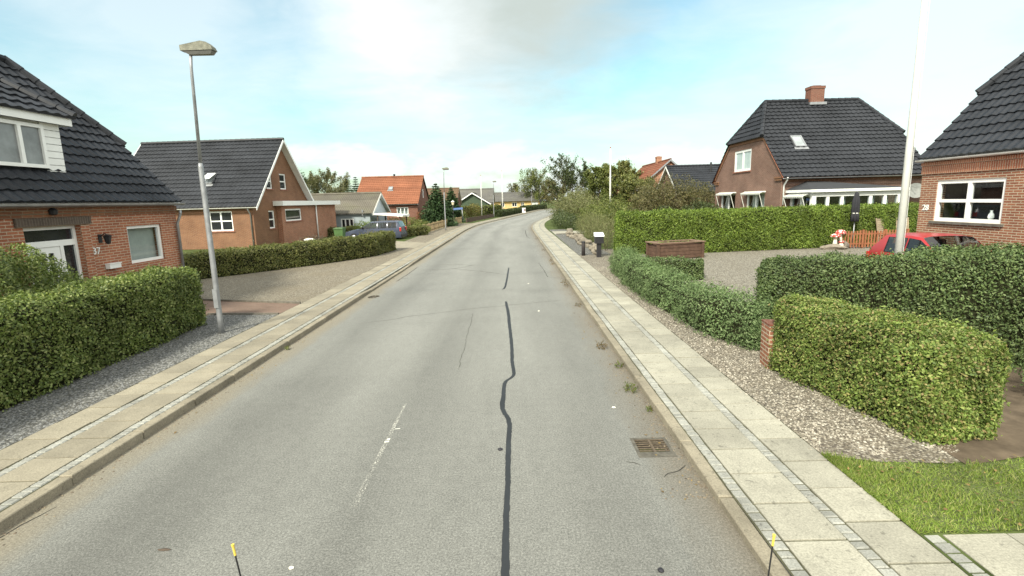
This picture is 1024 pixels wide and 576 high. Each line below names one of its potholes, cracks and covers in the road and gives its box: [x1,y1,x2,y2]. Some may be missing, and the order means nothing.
drain grate [630,437,677,458]
crack [368,301,548,367]
